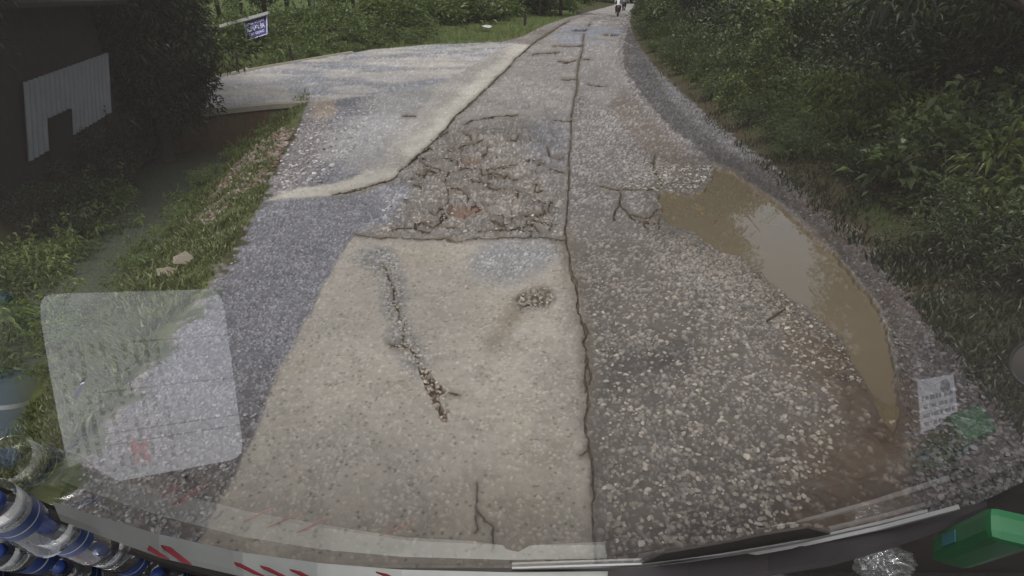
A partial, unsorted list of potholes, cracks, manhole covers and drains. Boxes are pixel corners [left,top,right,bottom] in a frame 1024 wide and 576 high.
pothole [655,164,902,437]
crack [599,156,661,229]
crack [333,21,607,524]
pothole [513,284,556,310]
